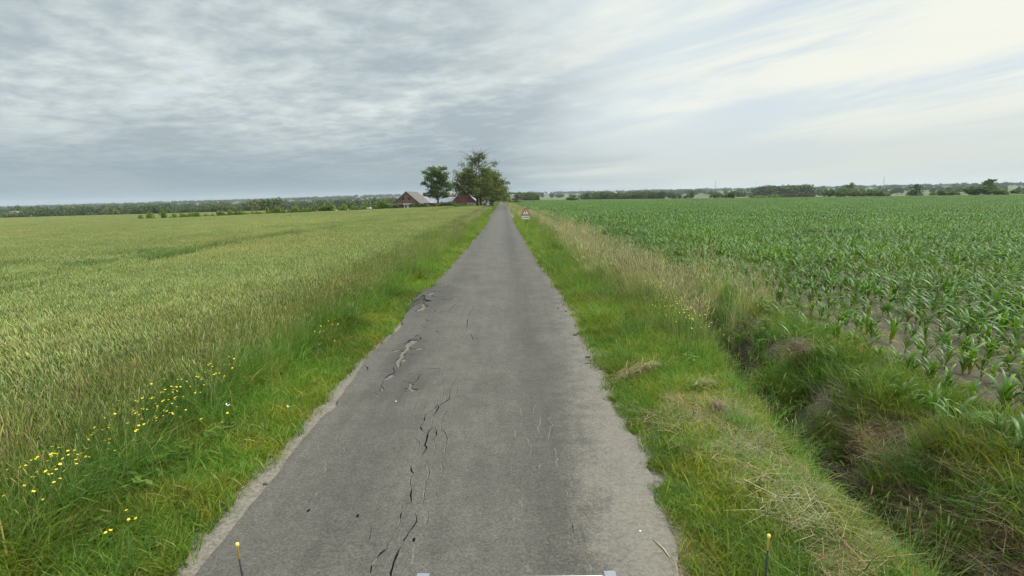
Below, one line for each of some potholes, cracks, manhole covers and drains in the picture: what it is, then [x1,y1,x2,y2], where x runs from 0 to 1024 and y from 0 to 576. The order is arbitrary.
crack [514,404,592,572]
crack [367,291,473,576]
